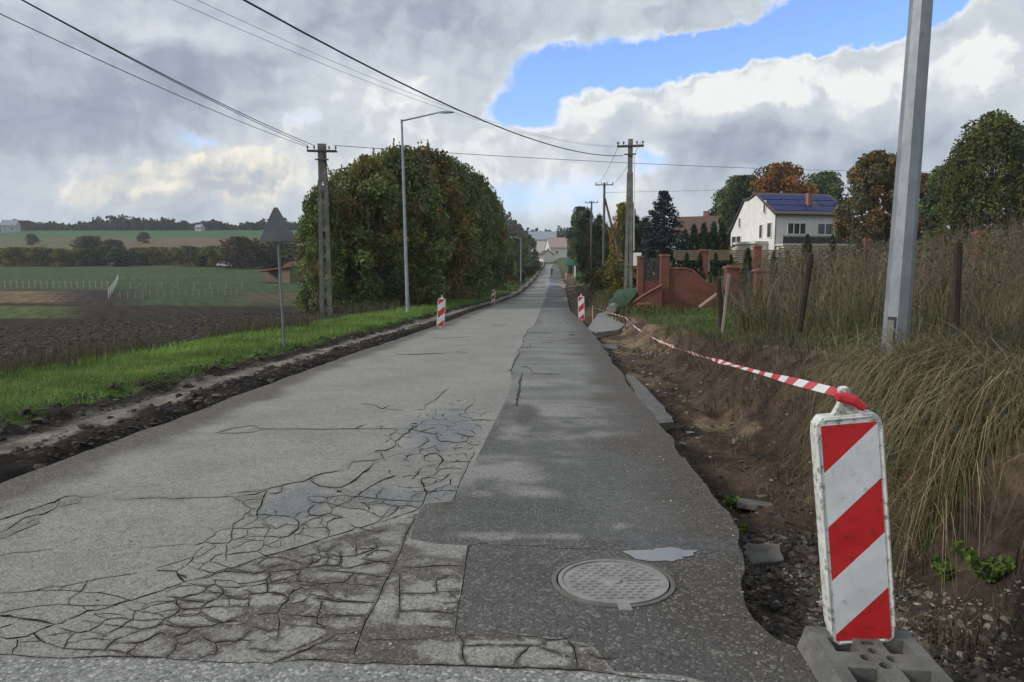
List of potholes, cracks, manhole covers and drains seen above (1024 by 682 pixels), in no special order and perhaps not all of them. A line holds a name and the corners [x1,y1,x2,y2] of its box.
crack [509,332,554,407]
manhole cover [552,557,676,611]
crack [369,543,621,668]
crack [0,387,492,663]
